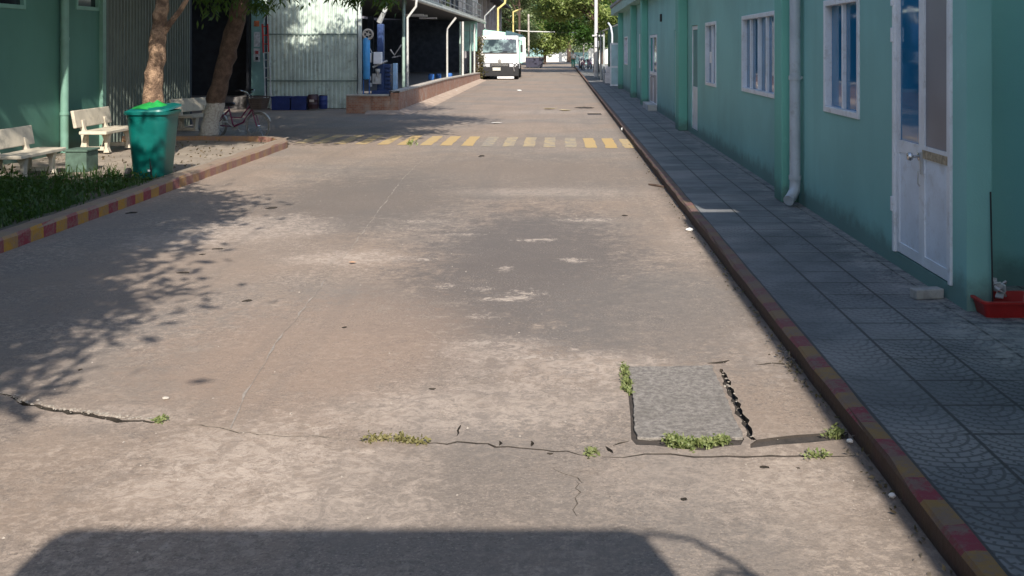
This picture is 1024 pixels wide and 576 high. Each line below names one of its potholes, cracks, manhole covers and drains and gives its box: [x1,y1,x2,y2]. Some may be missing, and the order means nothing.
crack [554,469,582,516]
crack [2,394,360,441]
crack [605,360,856,458]
